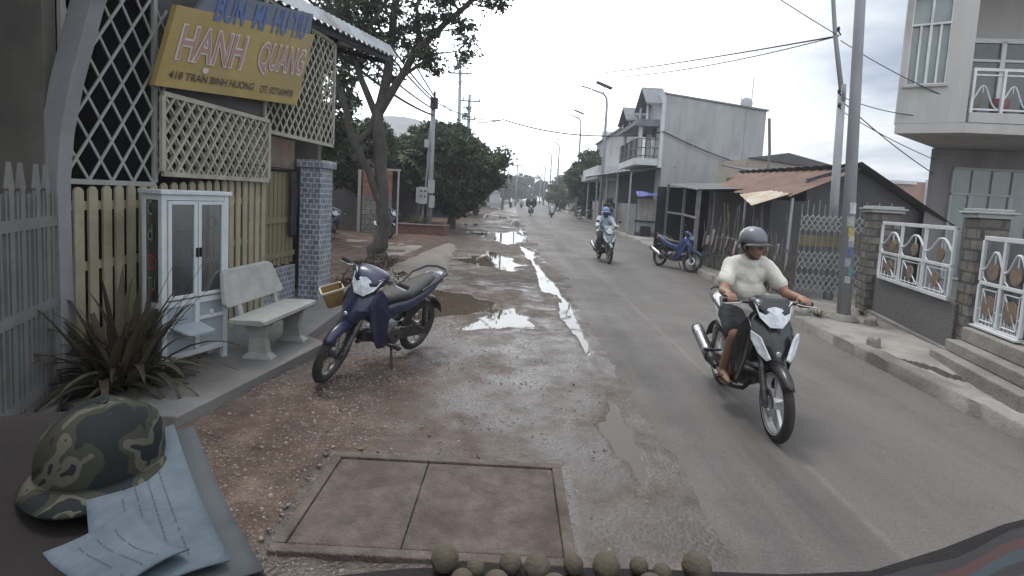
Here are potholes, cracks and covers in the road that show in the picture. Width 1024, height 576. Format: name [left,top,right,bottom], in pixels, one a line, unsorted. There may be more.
pothole [460,230,525,248]
manhole cover [267,452,576,567]
pothole [449,250,532,276]
crack [899,358,963,382]
pothole [412,287,545,331]
